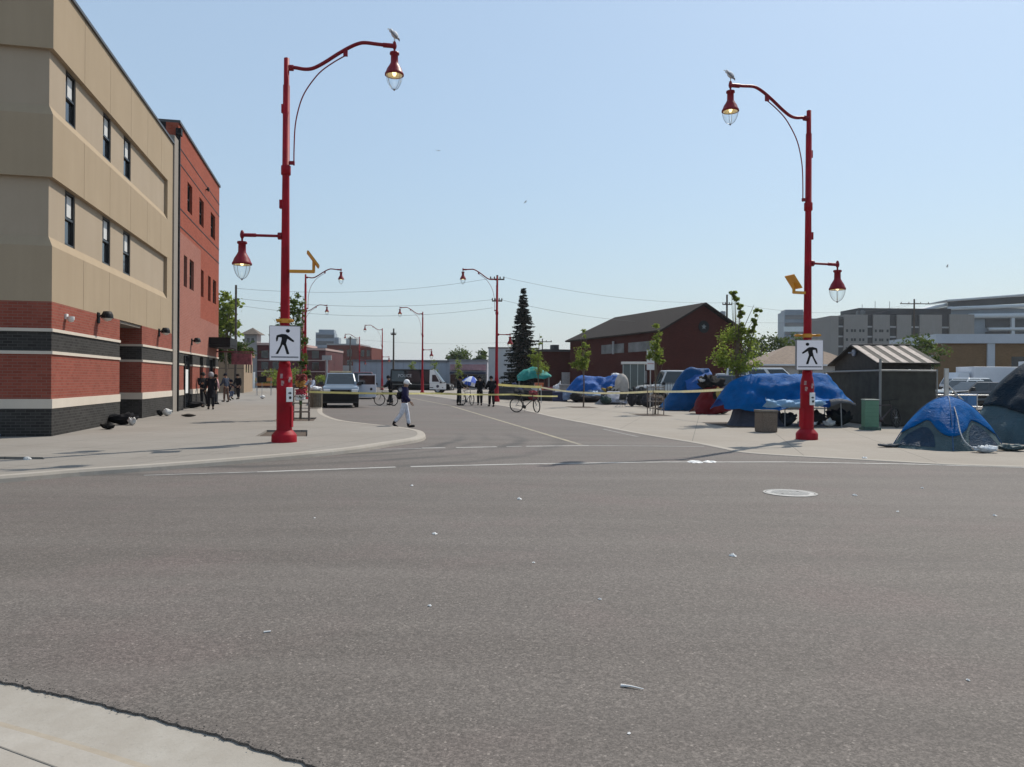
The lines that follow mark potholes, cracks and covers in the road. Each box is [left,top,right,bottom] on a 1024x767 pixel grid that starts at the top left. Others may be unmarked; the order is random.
manhole cover [763,489,818,497]
